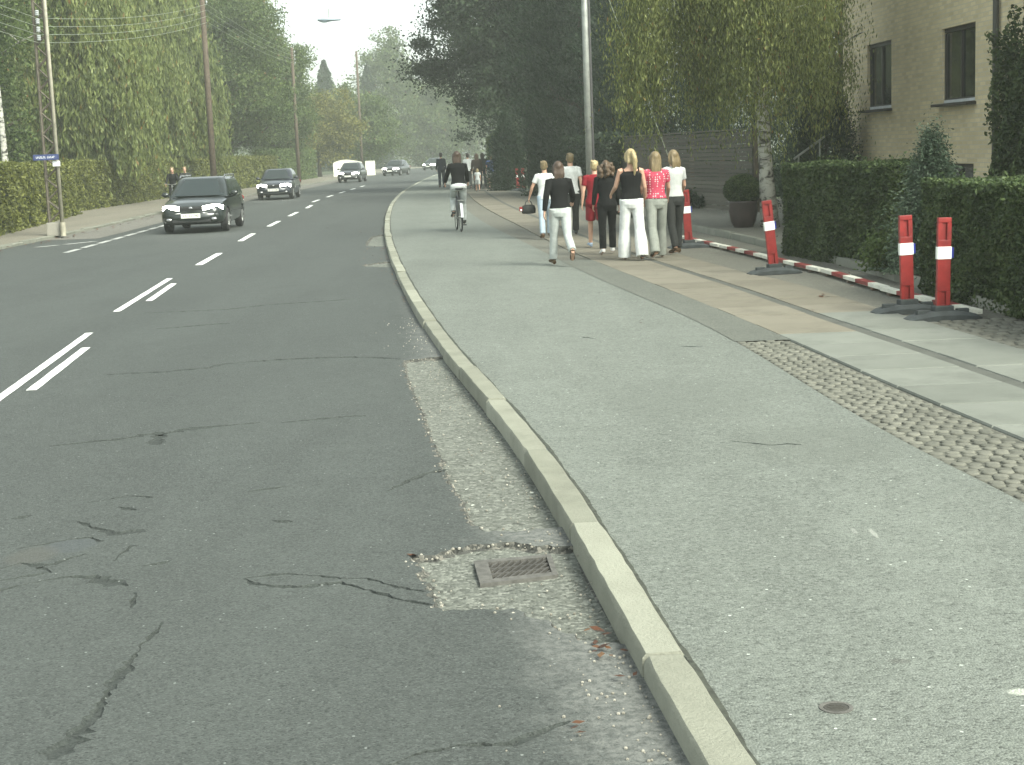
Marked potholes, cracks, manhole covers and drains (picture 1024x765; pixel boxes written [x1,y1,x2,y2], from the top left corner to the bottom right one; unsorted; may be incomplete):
crack [107,356,396,375]
crack [244,573,433,606]
crack [387,469,447,491]
crack [280,415,366,423]
drain grate [474,554,558,588]
crack [0,496,171,760]
crack [54,422,260,446]
manhole cover [819,701,853,714]
